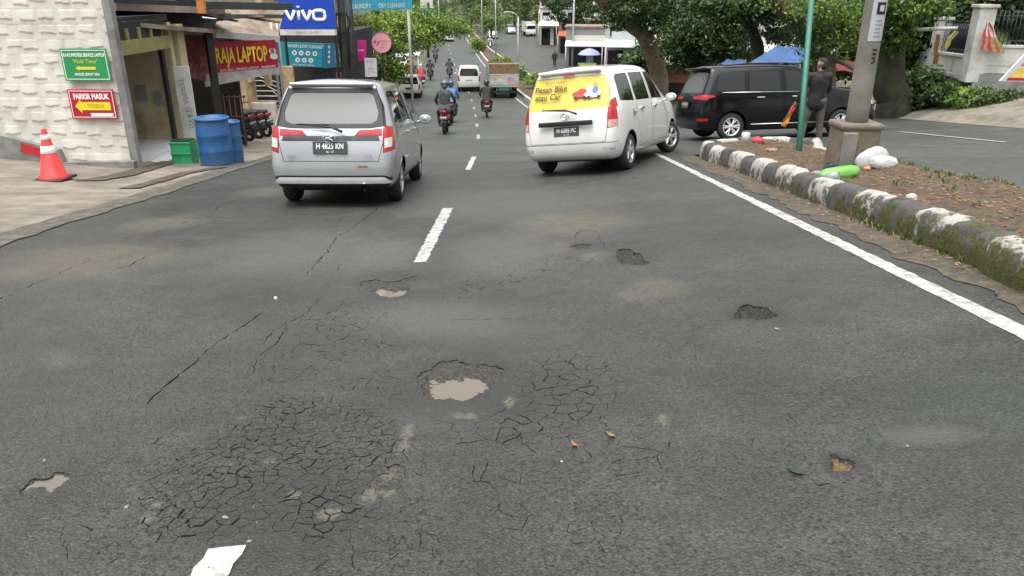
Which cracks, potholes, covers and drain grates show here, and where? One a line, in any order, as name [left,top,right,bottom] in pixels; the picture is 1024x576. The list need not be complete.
pothole [417,360,504,401]
crack [437,353,671,549]
crack [307,207,378,278]
crack [146,299,402,448]
pothole [734,304,777,320]
pothole [616,248,649,265]
pothole [360,276,416,297]
pothole [829,454,856,472]
crack [129,370,644,575]
pothole [20,472,71,494]
